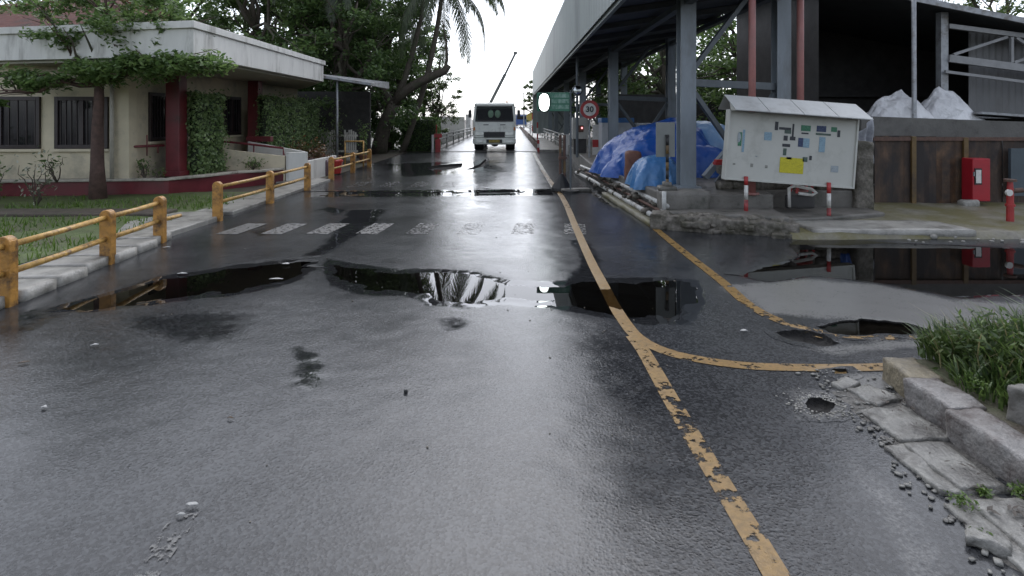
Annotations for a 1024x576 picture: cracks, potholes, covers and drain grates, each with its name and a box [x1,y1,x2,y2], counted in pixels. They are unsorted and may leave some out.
pothole [803,315,934,340]
pothole [775,388,854,423]
pothole [764,325,854,352]
